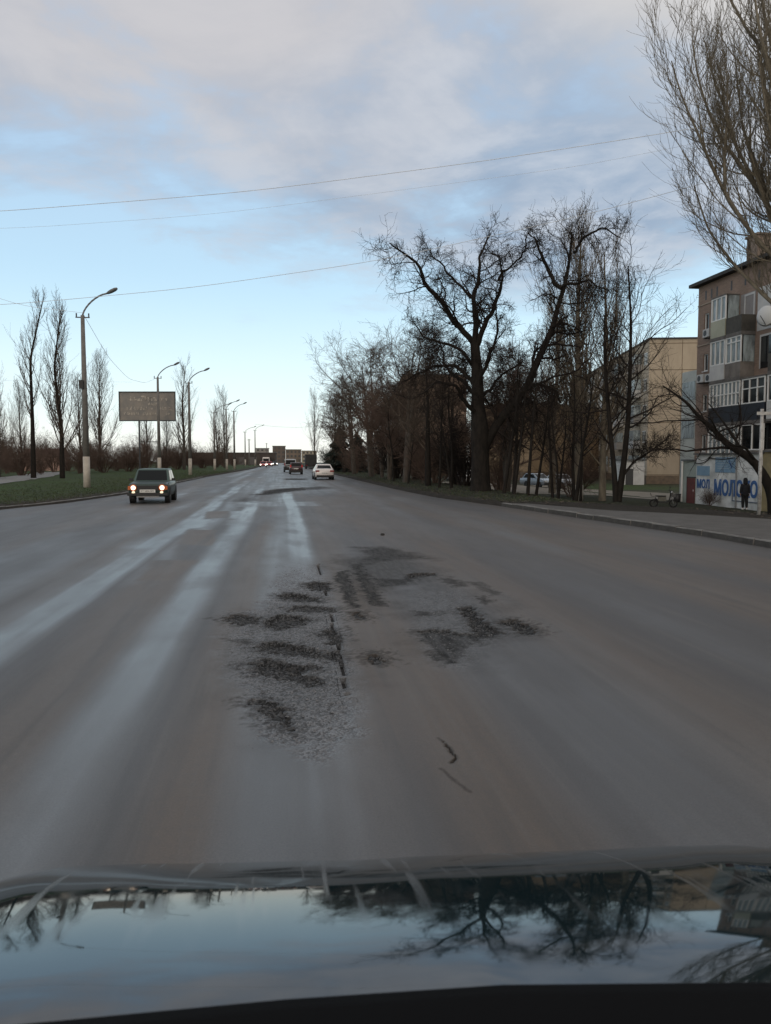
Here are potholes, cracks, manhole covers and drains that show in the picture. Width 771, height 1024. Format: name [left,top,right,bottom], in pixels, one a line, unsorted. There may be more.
pothole [457,608,505,638]
pothole [248,700,298,731]
pothole [249,660,325,687]
pothole [264,614,313,630]
pothole [252,642,329,659]
pothole [221,614,261,626]
pothole [498,621,537,635]
pothole [418,630,488,638]
pothole [318,630,341,649]
